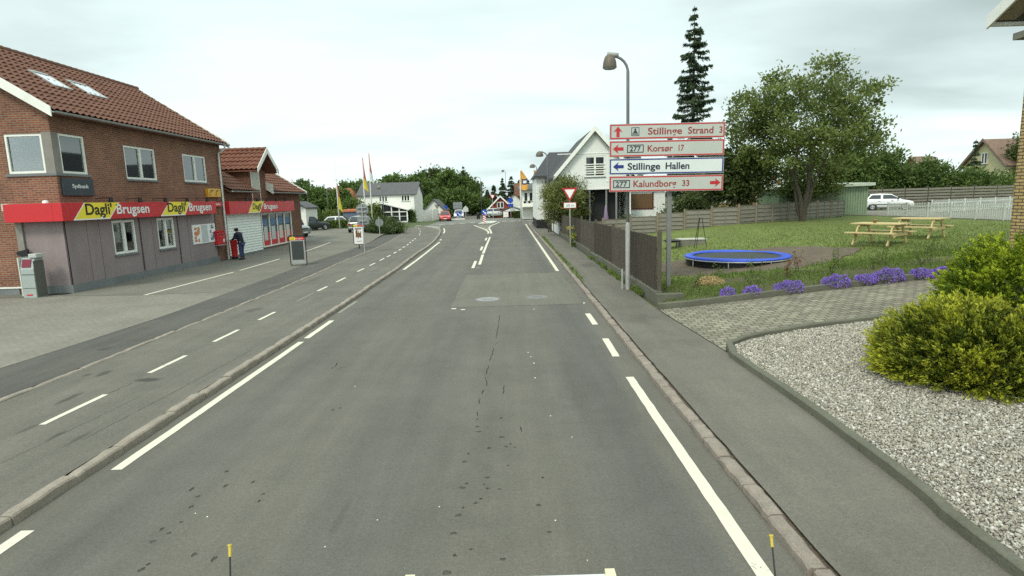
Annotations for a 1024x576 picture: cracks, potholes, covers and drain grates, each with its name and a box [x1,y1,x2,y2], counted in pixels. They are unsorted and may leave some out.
crack [477,316,505,416]
